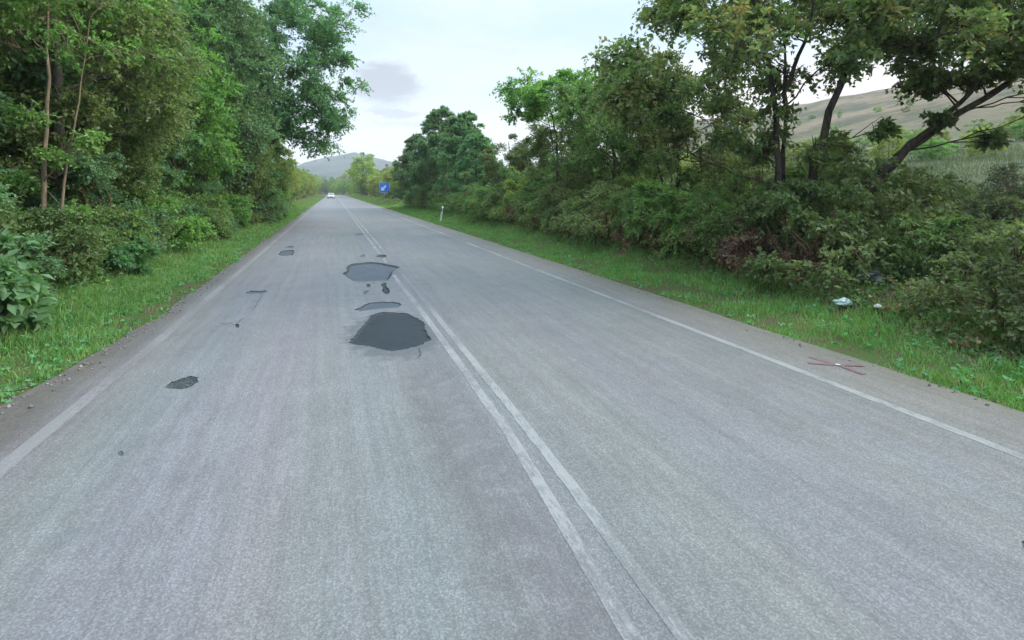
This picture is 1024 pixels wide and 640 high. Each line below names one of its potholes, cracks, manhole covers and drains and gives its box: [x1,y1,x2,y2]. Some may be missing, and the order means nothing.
pothole [165,376,199,389]
pothole [354,302,401,311]
pothole [343,262,399,282]
